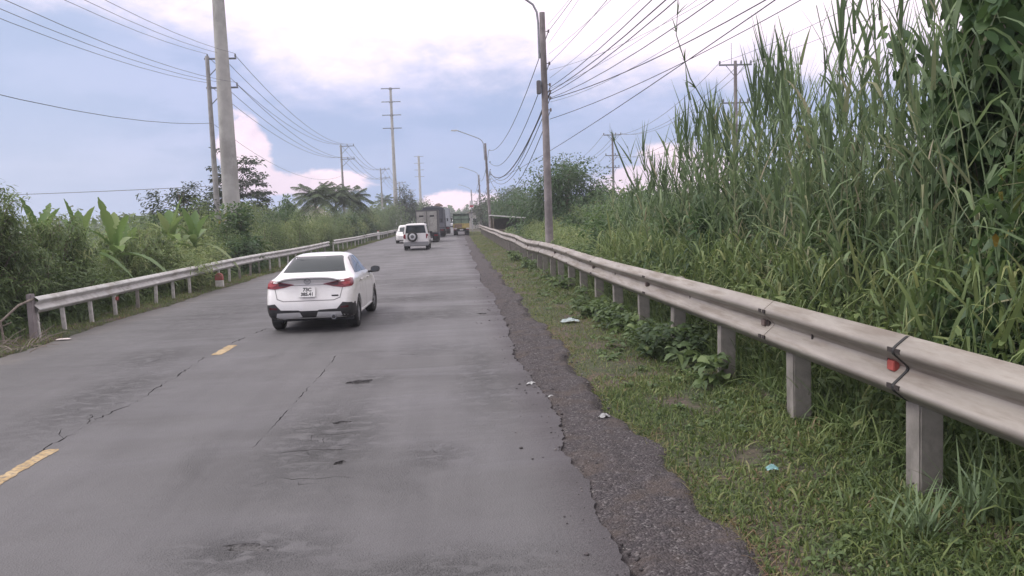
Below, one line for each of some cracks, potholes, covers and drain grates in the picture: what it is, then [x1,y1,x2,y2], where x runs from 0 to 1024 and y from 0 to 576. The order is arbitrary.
crack [35,357,204,455]
pothole [223,543,275,552]
crack [252,359,354,486]
